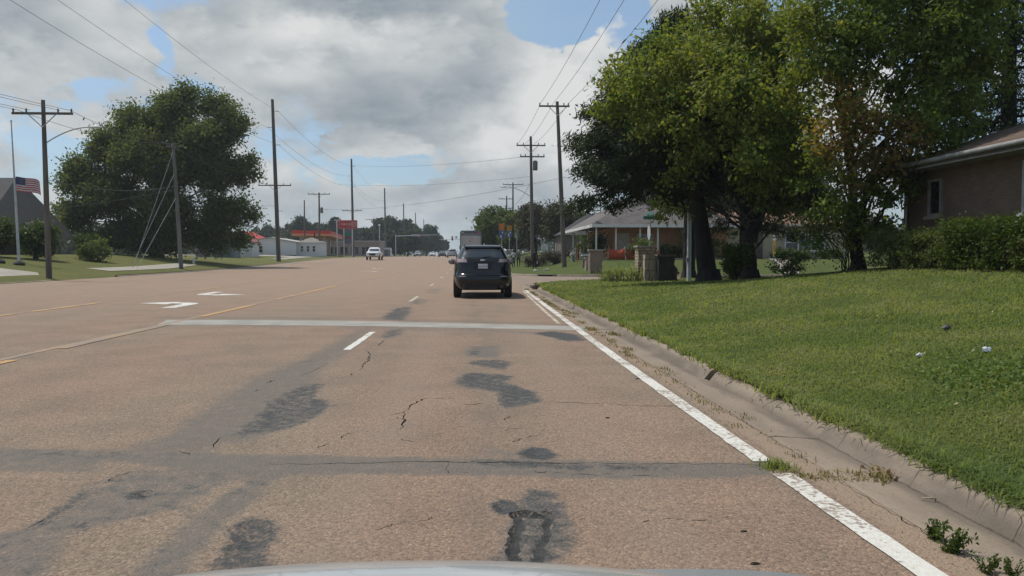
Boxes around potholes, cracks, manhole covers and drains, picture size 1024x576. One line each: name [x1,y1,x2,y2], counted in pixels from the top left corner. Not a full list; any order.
crack [318,398,481,448]
